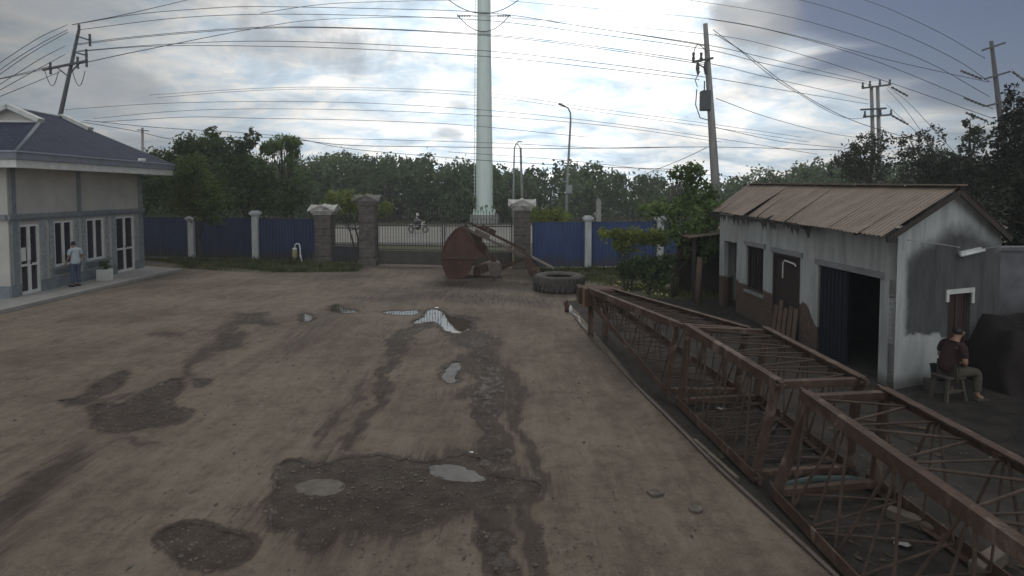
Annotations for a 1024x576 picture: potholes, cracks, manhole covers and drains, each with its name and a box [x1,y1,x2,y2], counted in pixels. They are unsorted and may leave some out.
pothole [259,450,549,559]
pothole [407,308,480,335]
pothole [433,359,470,386]
pothole [146,517,264,576]
pothole [293,312,319,323]
pothole [324,303,363,314]
pothole [78,376,202,437]
